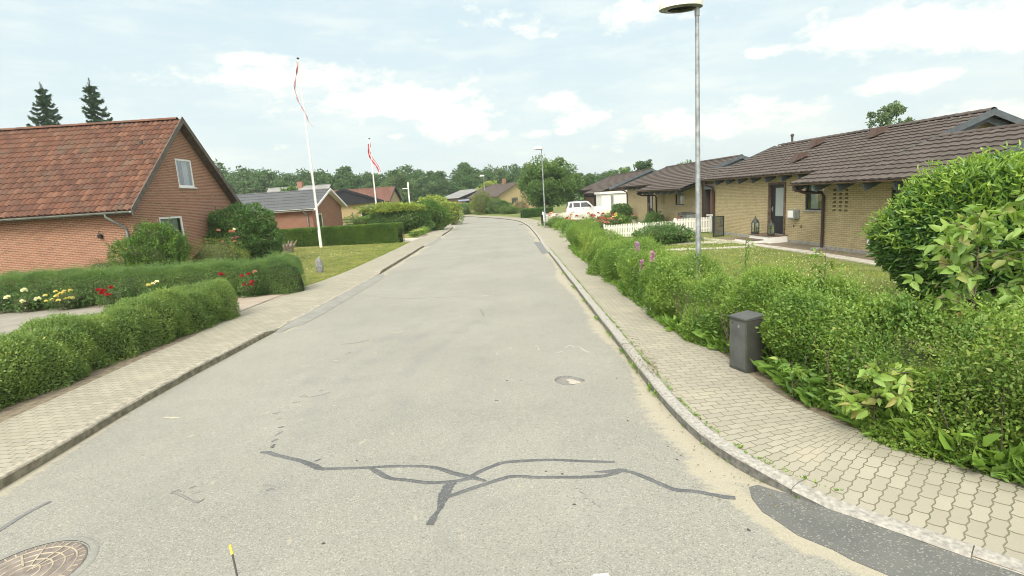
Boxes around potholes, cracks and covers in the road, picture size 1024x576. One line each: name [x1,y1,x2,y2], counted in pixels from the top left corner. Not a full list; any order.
manhole cover [0,536,100,576]
